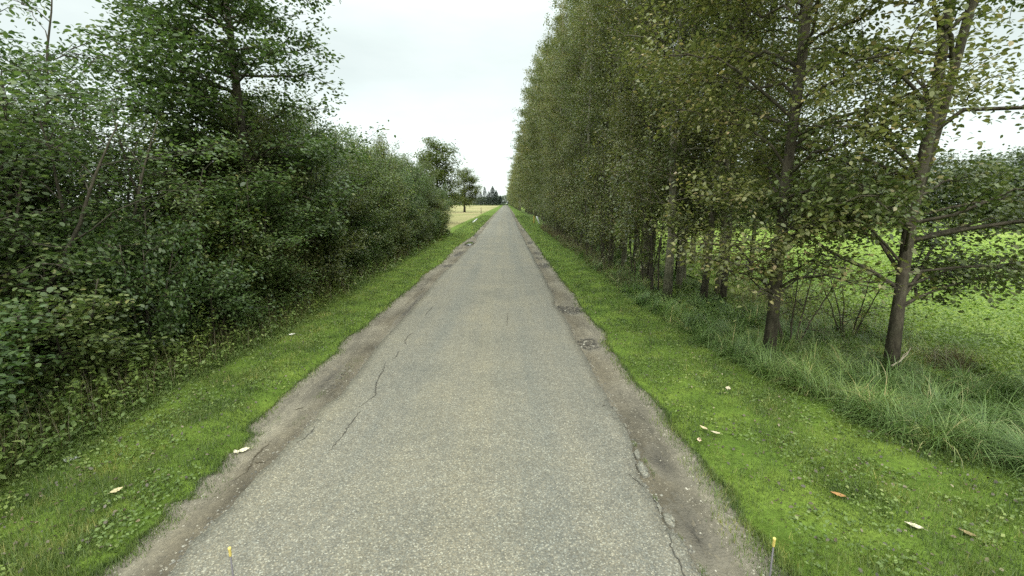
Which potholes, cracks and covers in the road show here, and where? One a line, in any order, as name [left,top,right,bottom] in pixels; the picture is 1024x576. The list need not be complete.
crack [327,334,411,454]
pothole [576,336,601,352]
crack [669,534,686,576]
pothole [555,303,584,316]
